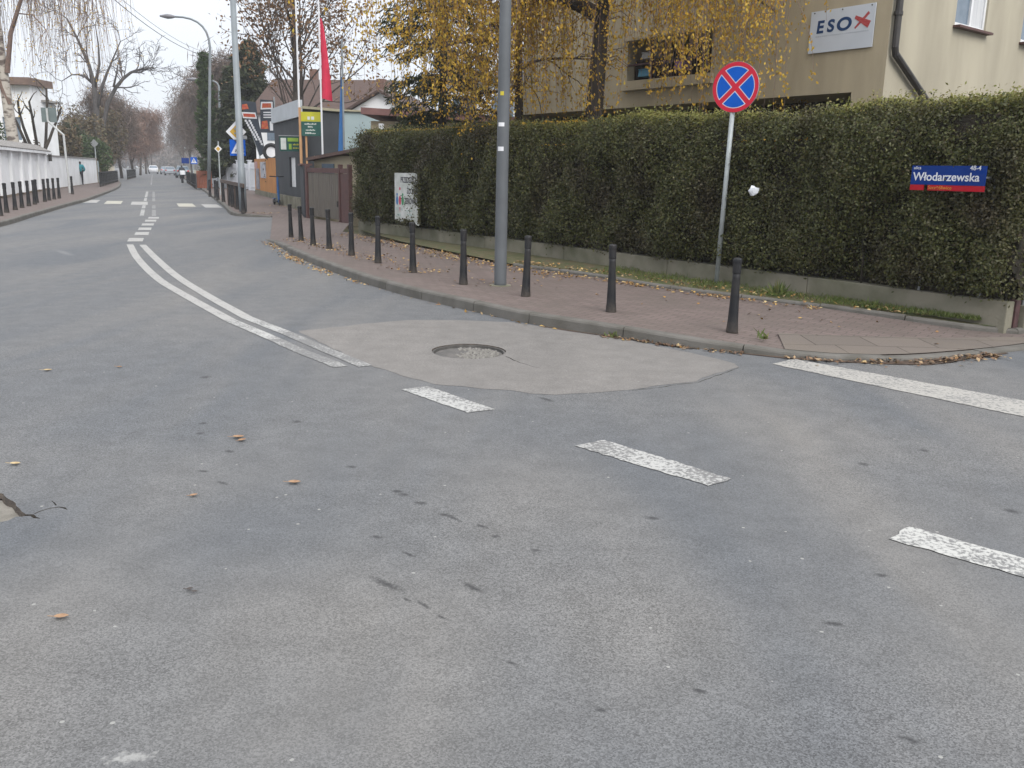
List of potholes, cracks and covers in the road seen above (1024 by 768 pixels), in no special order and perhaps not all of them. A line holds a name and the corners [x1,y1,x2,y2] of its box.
manhole cover [432,344,506,359]
pothole [0,493,67,522]
